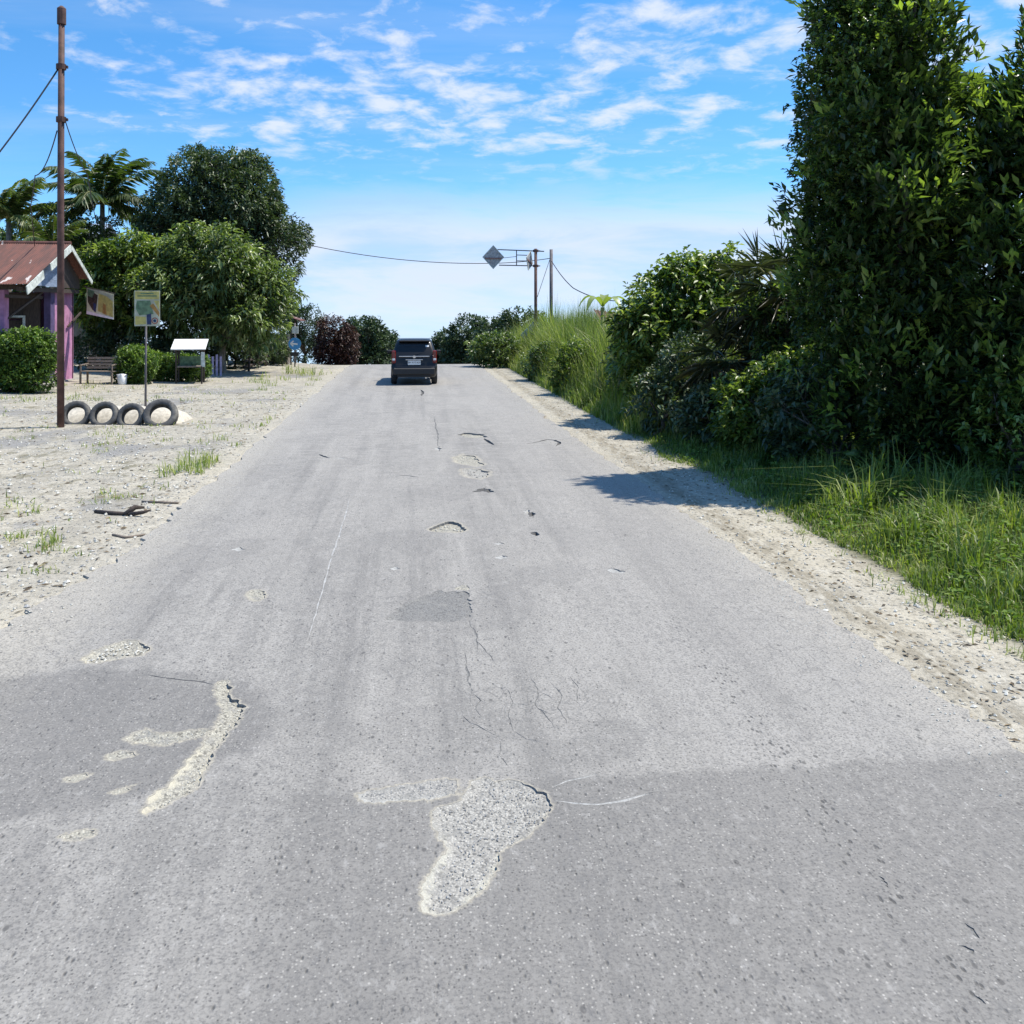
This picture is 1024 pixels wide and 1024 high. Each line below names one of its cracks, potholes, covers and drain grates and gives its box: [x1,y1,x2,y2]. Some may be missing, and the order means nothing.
pothole [429,521,467,533]
pothole [358,778,458,803]
pothole [125,729,212,746]
crack [553,771,653,805]
pothole [420,777,553,915]
pothole [461,468,489,479]
pothole [65,751,136,794]
pothole [453,455,484,466]
crack [464,620,579,765]
pothole [142,680,246,814]
pothole [81,640,150,663]
